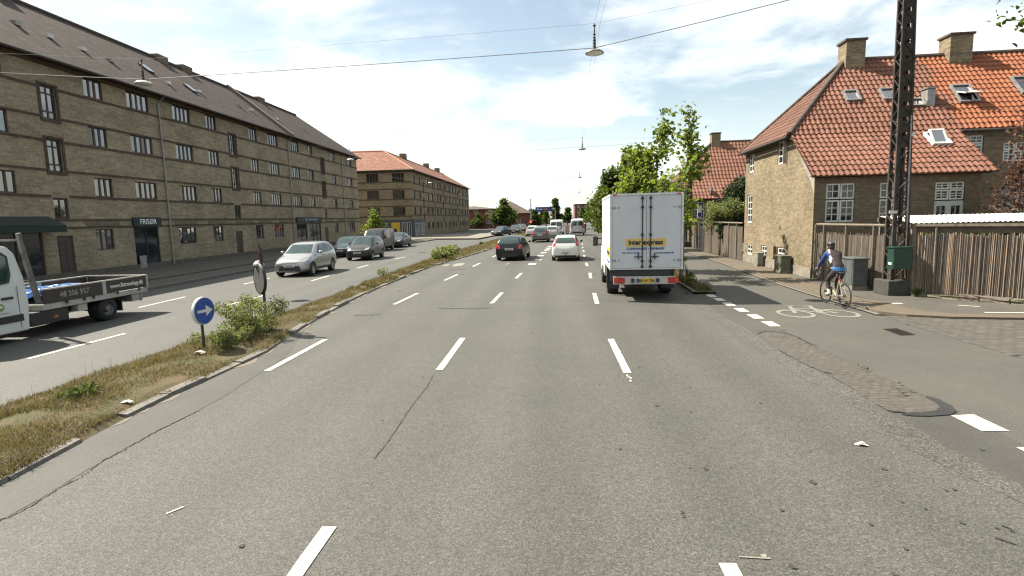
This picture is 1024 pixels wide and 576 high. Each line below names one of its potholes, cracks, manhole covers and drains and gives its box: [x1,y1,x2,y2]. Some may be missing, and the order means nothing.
crack [373,375,433,459]
